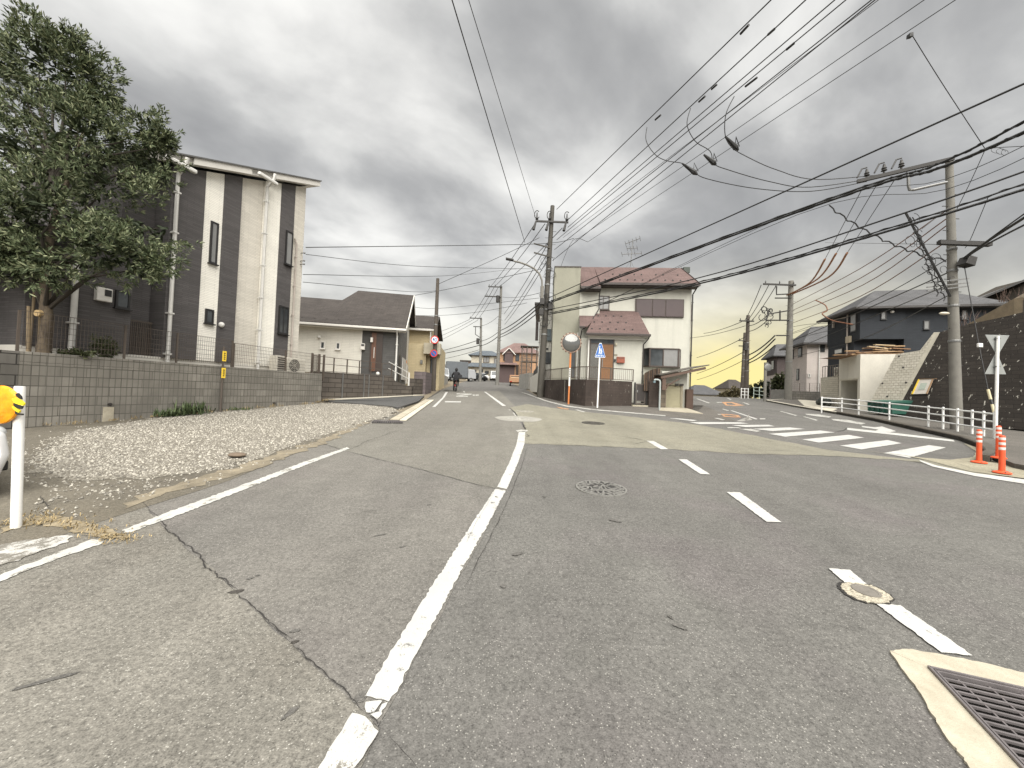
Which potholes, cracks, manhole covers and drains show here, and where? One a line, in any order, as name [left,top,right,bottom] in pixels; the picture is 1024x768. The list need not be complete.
drain grate [890,649,1024,768]
utility cover [837,582,895,604]
manhole cover [576,480,627,497]
